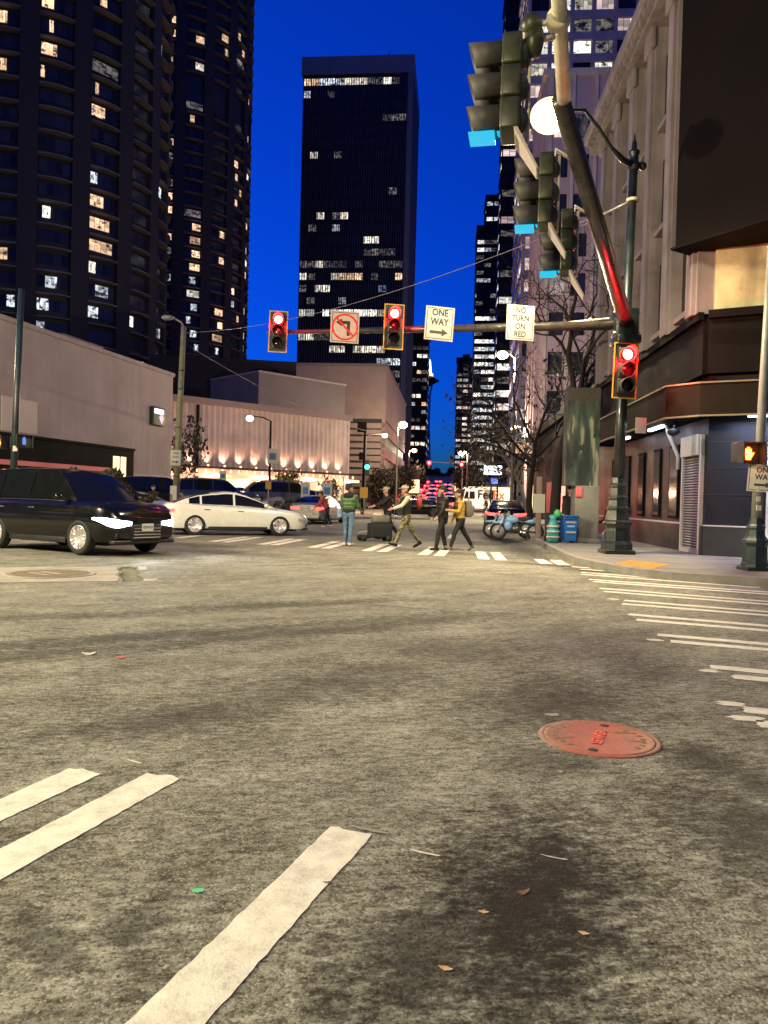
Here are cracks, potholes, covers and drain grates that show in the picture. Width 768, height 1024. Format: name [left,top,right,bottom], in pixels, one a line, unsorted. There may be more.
pothole [118,567,142,582]
manhole cover [538,720,662,759]
manhole cover [2,569,96,578]
